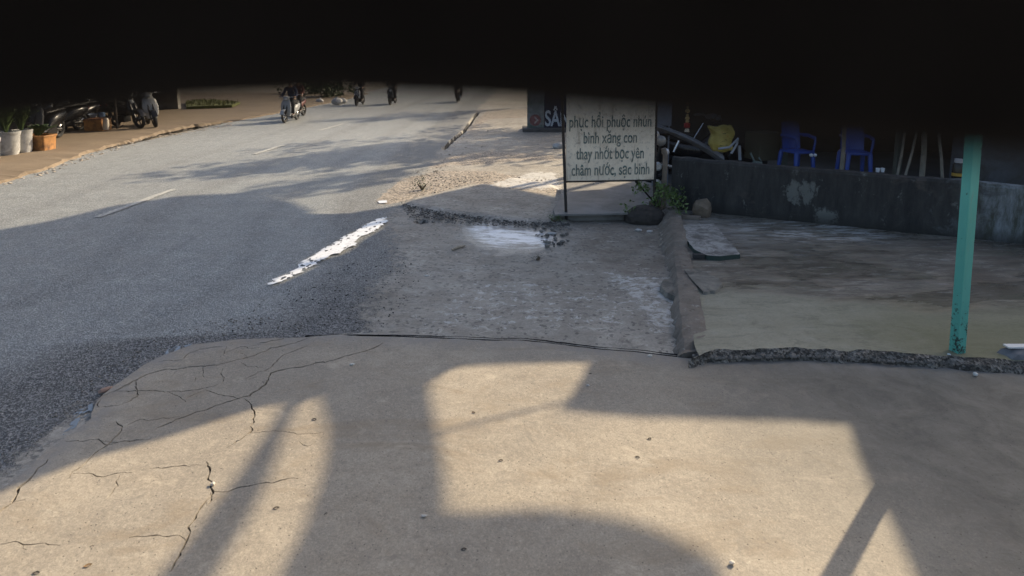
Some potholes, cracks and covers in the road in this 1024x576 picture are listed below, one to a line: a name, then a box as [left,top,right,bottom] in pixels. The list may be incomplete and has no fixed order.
crack [116,464,214,568]
